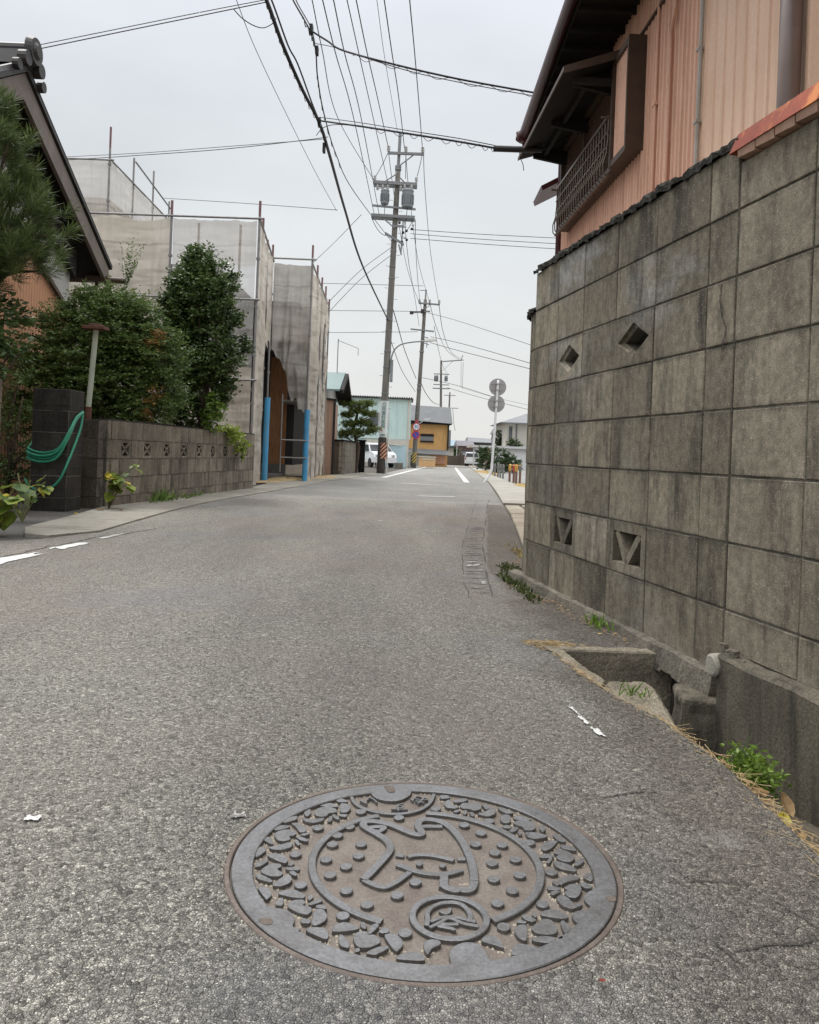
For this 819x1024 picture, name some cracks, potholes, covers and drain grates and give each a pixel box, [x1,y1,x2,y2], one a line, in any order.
crack [702,894,819,969]
manhole cover [219,781,627,987]
